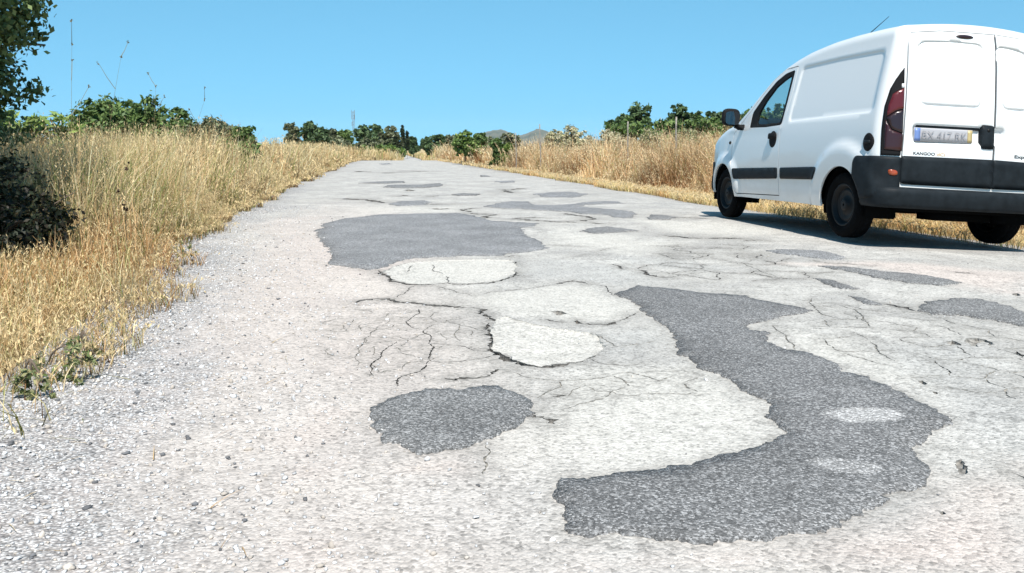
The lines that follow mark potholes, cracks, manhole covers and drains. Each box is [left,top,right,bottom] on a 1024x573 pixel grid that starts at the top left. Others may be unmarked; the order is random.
crack [319,235,874,424]
crack [808,298,1024,399]
